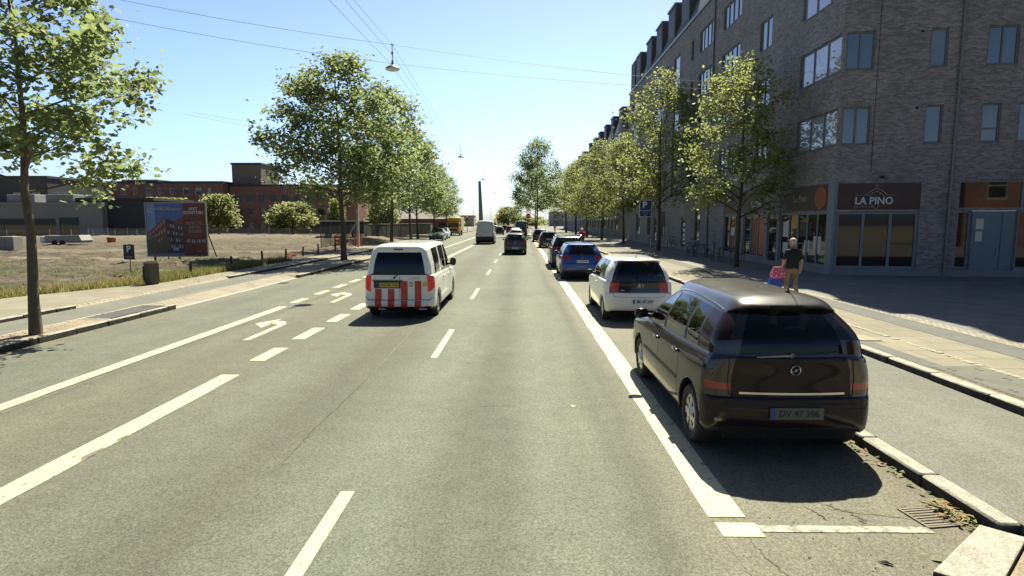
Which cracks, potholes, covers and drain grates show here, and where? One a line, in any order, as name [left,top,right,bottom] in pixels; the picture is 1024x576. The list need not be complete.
drain grate [897,506,965,529]
crack [804,504,914,525]
crack [278,375,371,469]
